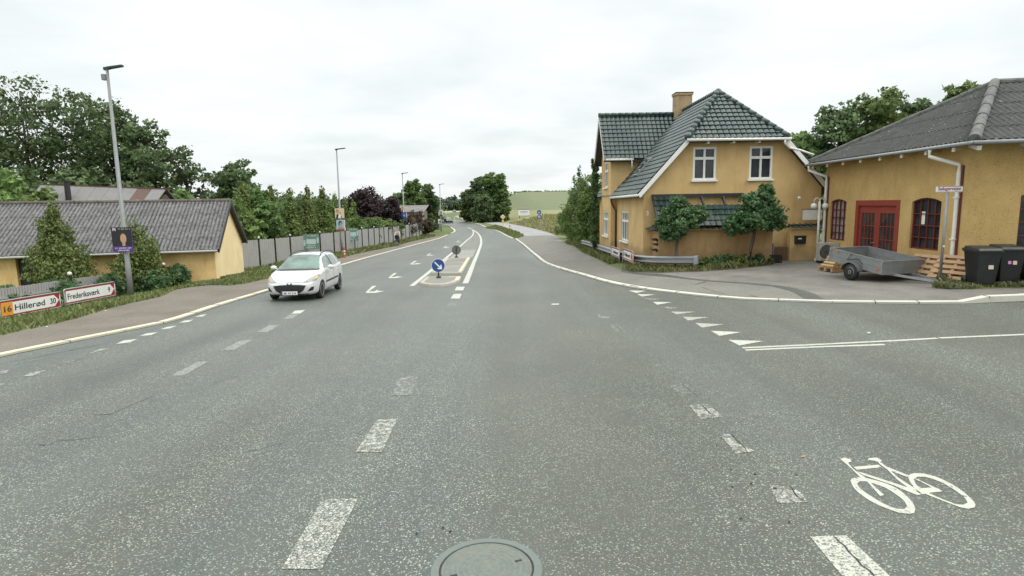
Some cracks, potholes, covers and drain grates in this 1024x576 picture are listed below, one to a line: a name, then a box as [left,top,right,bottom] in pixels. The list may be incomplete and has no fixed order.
crack [833,535,875,576]
manhole cover [430,538,543,576]
